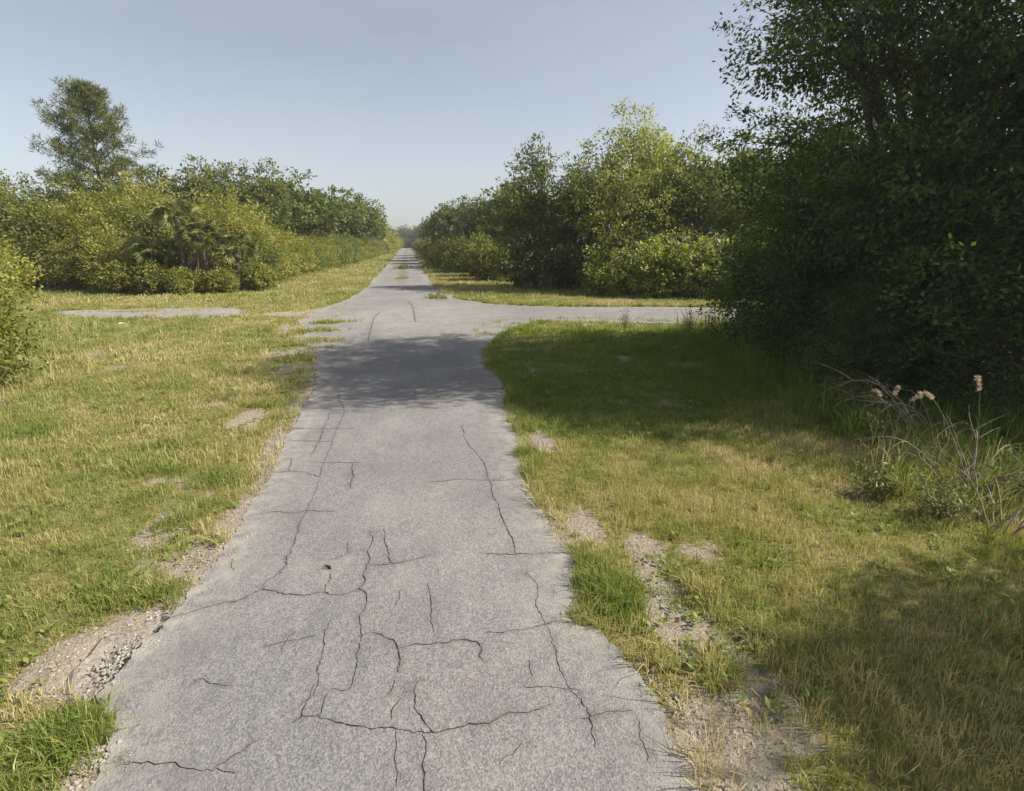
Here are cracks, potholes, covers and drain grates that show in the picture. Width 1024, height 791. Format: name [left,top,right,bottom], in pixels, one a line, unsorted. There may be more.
crack [169,392,649,791]
crack [117,738,261,774]
